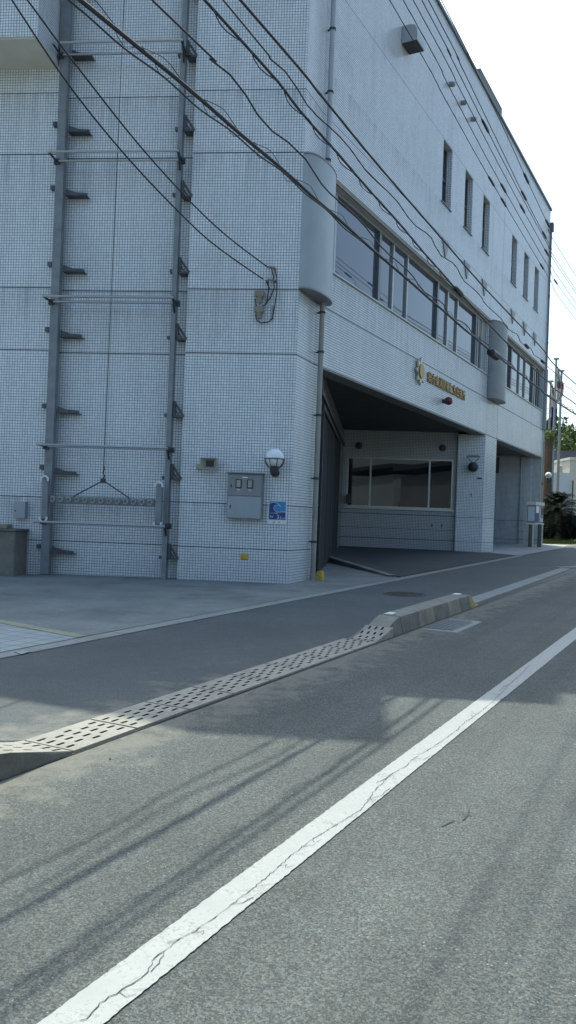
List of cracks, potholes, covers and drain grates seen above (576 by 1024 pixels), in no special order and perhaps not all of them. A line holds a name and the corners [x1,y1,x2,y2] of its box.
crack [82,667,527,1020]
drain grate [423,619,481,633]
